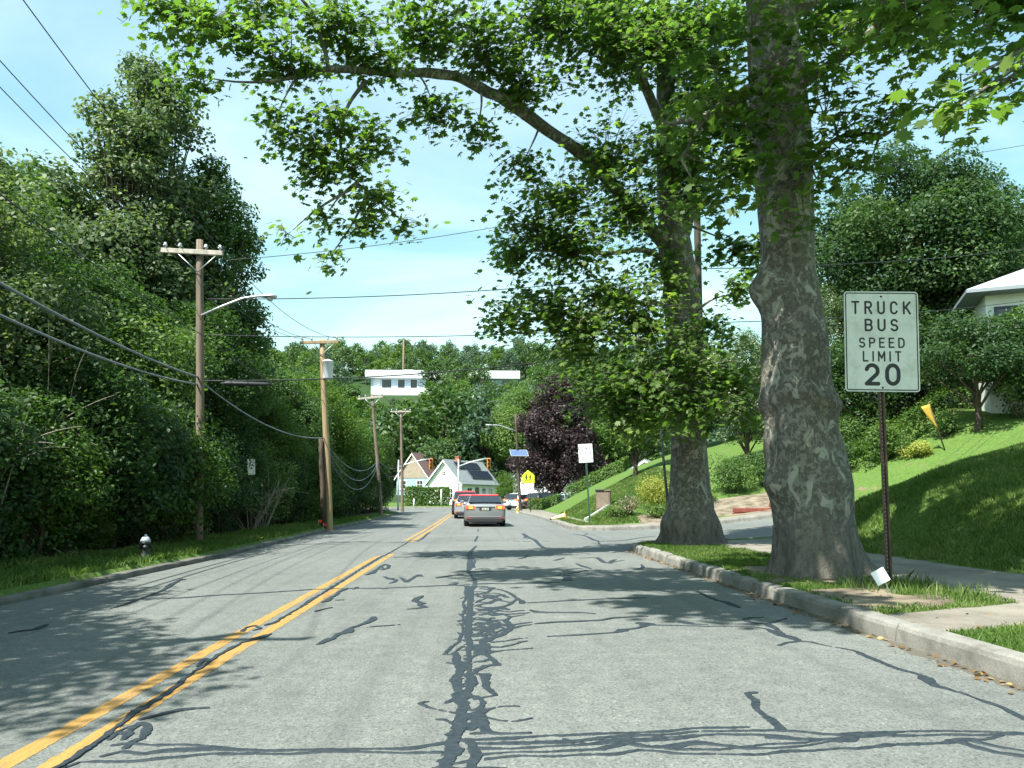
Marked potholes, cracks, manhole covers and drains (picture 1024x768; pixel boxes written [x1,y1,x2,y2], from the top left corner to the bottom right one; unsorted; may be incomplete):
crack [121,546,648,768]
